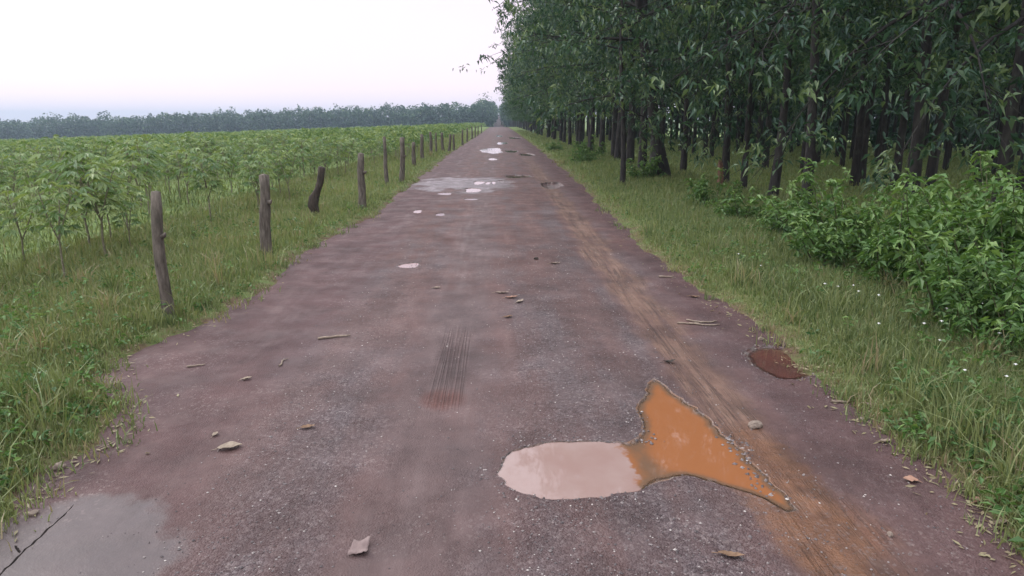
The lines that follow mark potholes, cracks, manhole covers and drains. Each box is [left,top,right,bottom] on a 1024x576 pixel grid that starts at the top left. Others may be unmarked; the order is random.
crack [0,506,73,575]
pothole [496,378,798,512]
